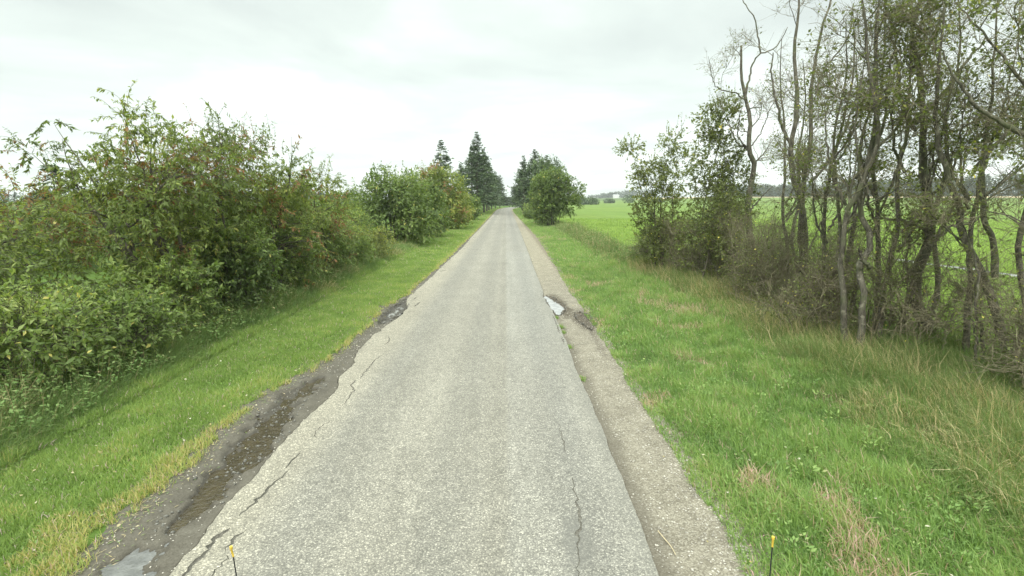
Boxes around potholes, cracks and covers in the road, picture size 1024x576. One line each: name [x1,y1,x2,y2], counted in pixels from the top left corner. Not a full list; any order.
pothole [378,298,409,324]
crack [572,479,582,576]
crack [182,424,324,576]
crack [344,337,390,404]
pothole [574,311,599,330]
